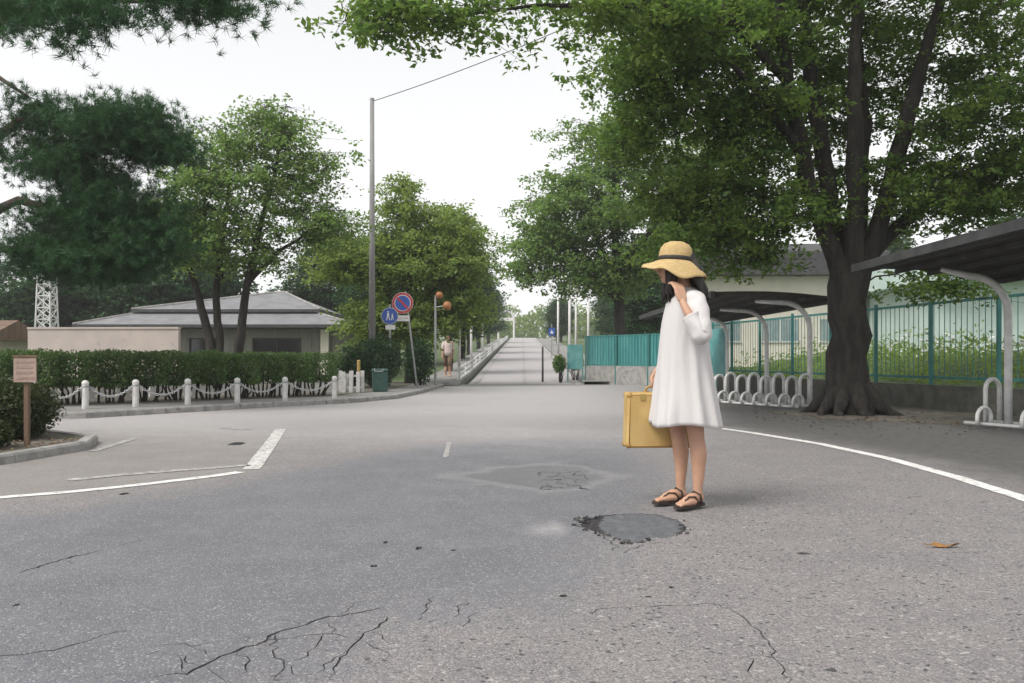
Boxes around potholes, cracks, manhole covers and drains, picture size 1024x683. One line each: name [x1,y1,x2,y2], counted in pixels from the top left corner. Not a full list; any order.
crack [97,602,392,681]
crack [0,602,130,656]
crack [19,539,149,573]
crack [593,603,792,683]
